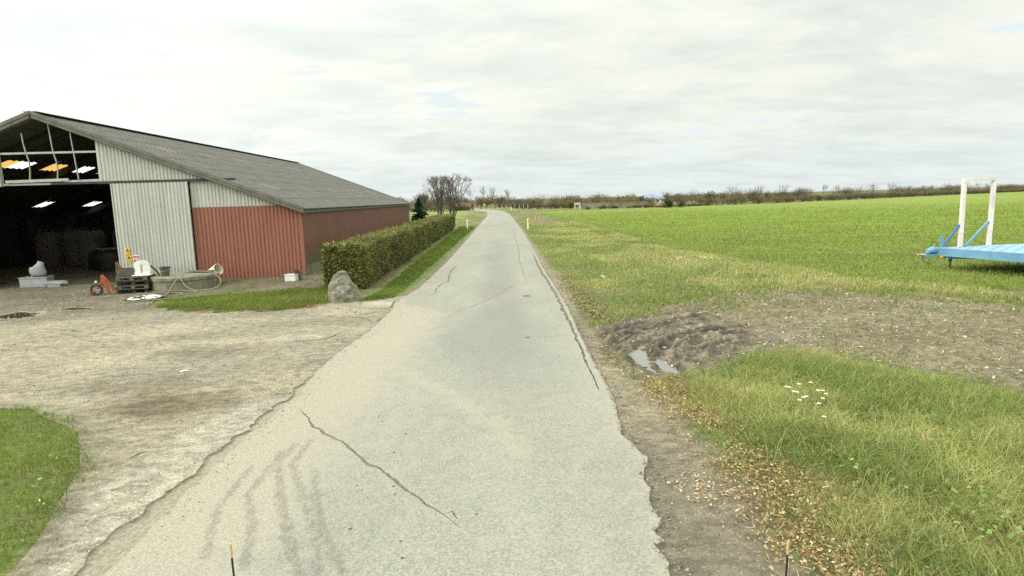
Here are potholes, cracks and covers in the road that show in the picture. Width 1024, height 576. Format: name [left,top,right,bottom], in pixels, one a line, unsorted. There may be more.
pothole [0,311,47,319]
crack [74,374,459,576]
crack [457,236,599,390]
